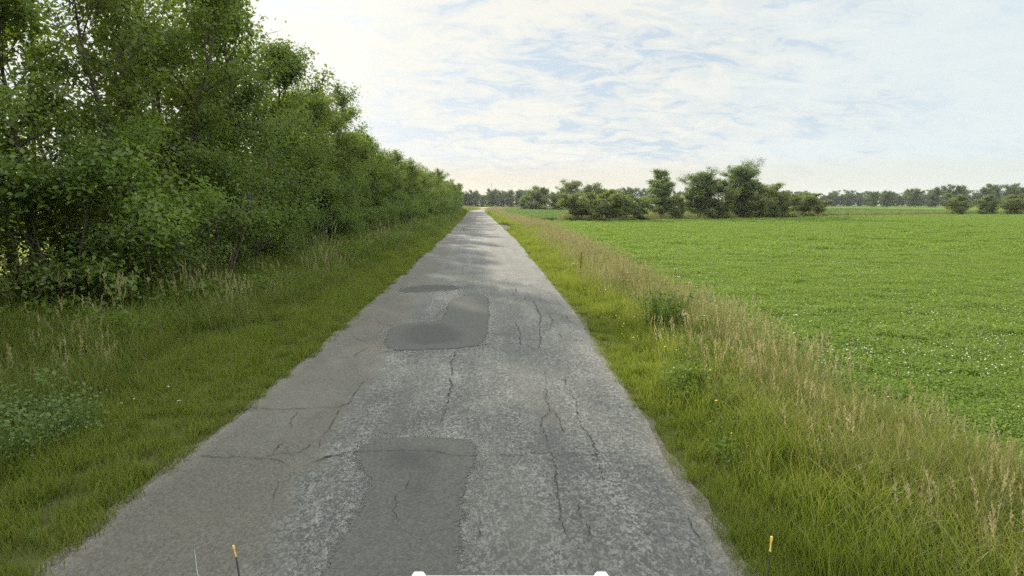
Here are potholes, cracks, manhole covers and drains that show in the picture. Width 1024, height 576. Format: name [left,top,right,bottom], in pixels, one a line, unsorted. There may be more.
crack [338,280,584,423]
crack [202,372,633,541]
